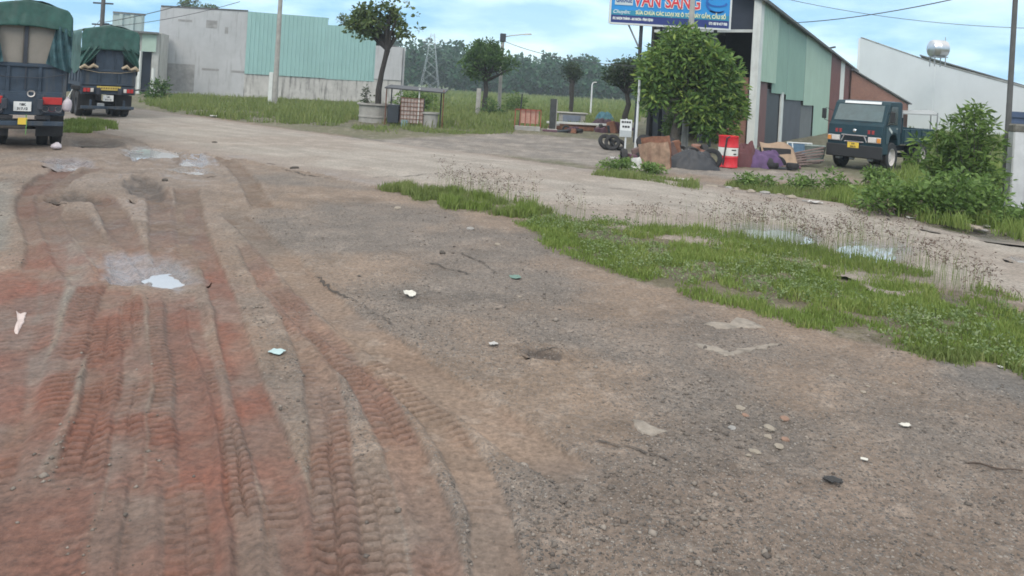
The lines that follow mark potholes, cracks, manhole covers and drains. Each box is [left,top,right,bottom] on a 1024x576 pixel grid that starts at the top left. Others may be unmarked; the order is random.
crack [301,265,396,326]
pothole [116,144,199,162]
pothole [175,152,220,174]
pothole [20,156,100,172]
crack [431,251,496,274]
pothole [118,172,172,204]
crack [593,439,673,462]
pothole [91,246,213,296]
pothole [154,166,226,177]
pothole [514,343,565,362]
